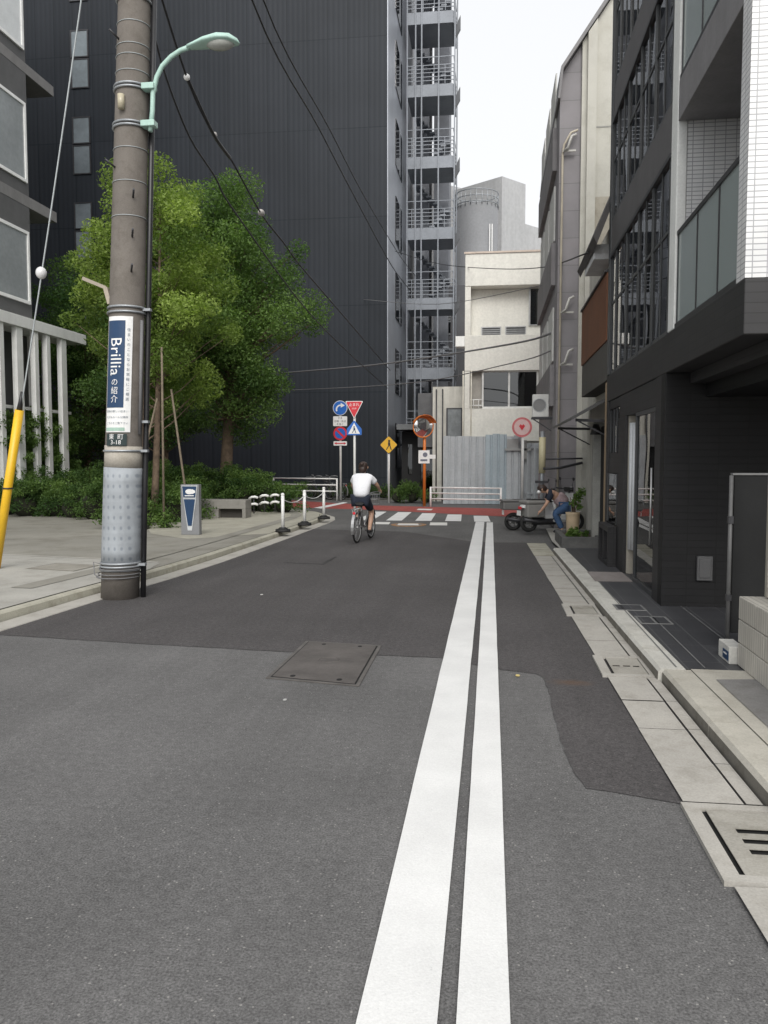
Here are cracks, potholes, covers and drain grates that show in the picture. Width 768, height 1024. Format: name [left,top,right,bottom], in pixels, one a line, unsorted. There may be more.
manhole cover [266,641,382,687]
drain grate [592,655,655,679]
drain grate [680,802,768,888]
